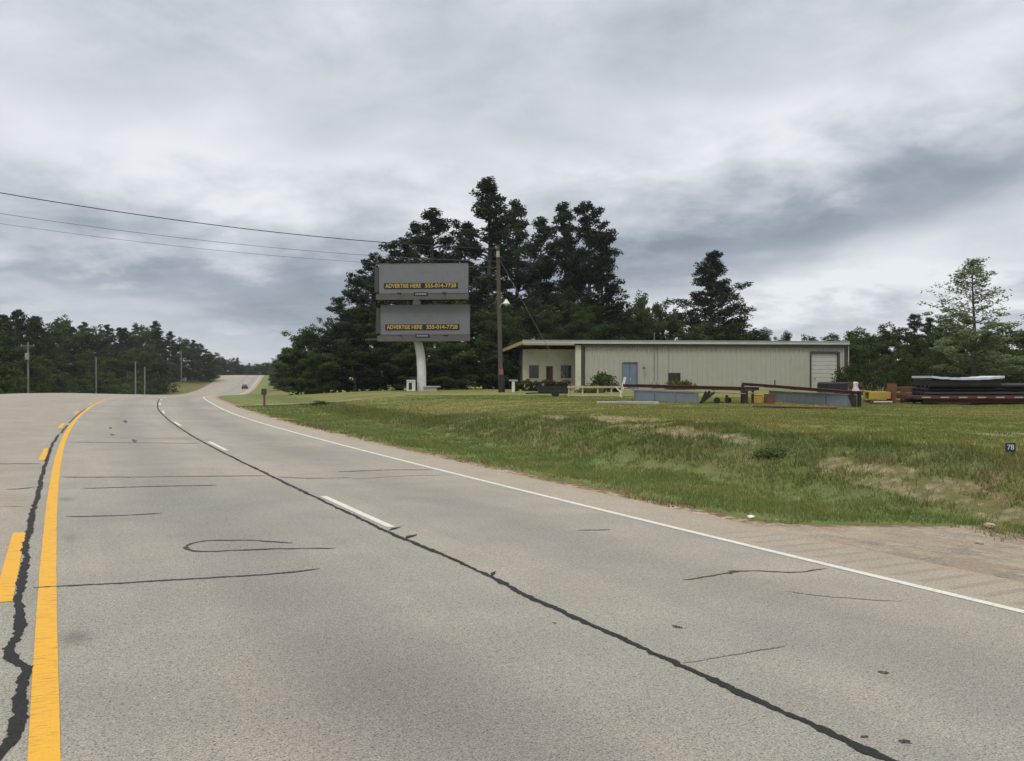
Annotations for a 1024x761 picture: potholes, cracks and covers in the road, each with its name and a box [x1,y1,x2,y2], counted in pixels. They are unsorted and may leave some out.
crack [683,568,827,580]
crack [183,540,330,552]
crack [105,469,416,488]
crack [33,568,320,588]
crack [683,645,785,663]
crack [785,590,901,601]
